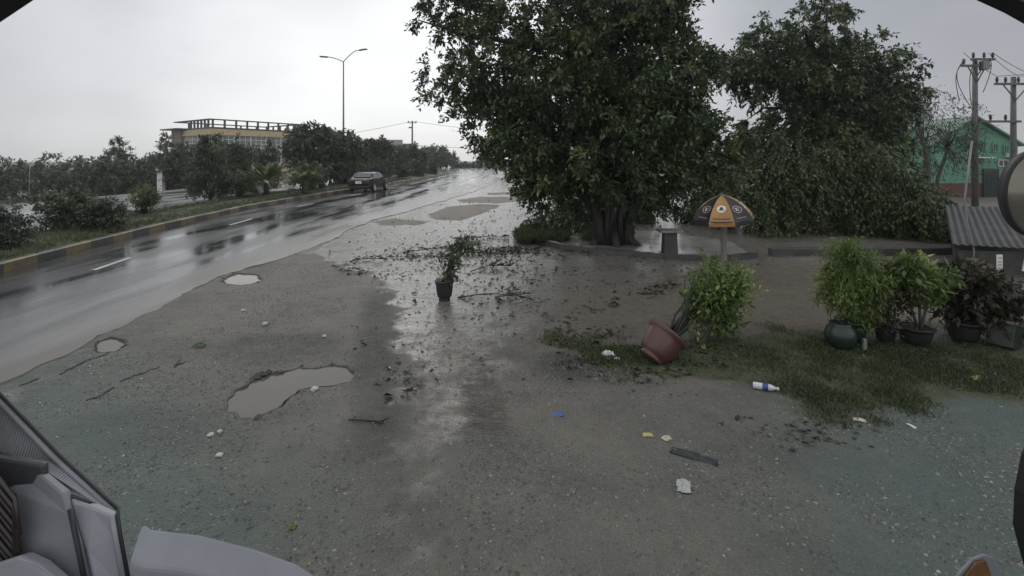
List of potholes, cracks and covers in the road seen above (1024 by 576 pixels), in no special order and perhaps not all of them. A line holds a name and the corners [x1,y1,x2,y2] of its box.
pothole [93,336,129,353]
crack [59,352,186,401]
pothole [220,272,263,285]
pothole [223,363,358,420]
